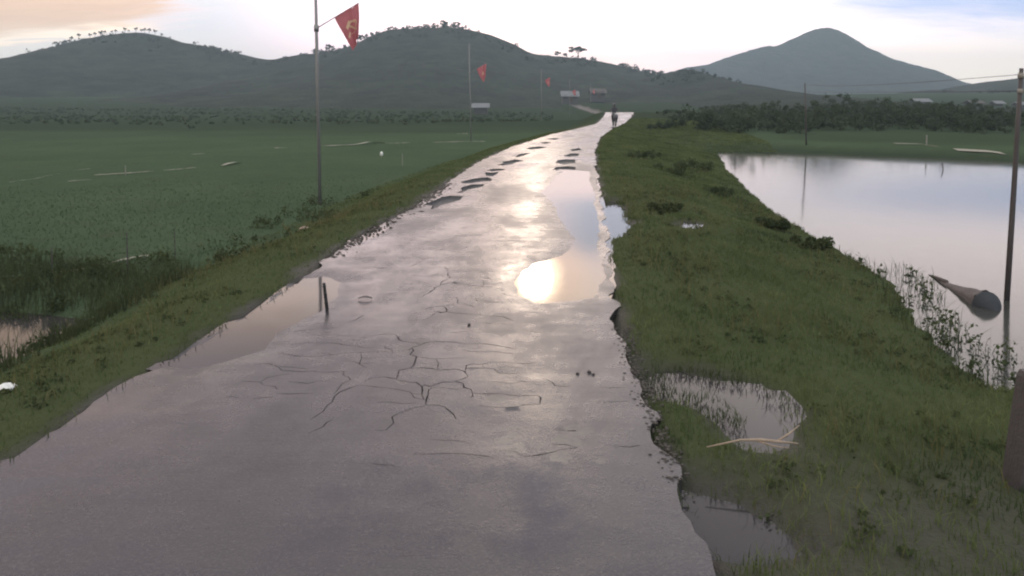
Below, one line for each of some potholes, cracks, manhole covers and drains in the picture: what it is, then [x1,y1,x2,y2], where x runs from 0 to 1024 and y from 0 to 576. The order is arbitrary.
crack [375,264,511,320]
crack [228,316,555,432]
pothole [424,196,463,209]
